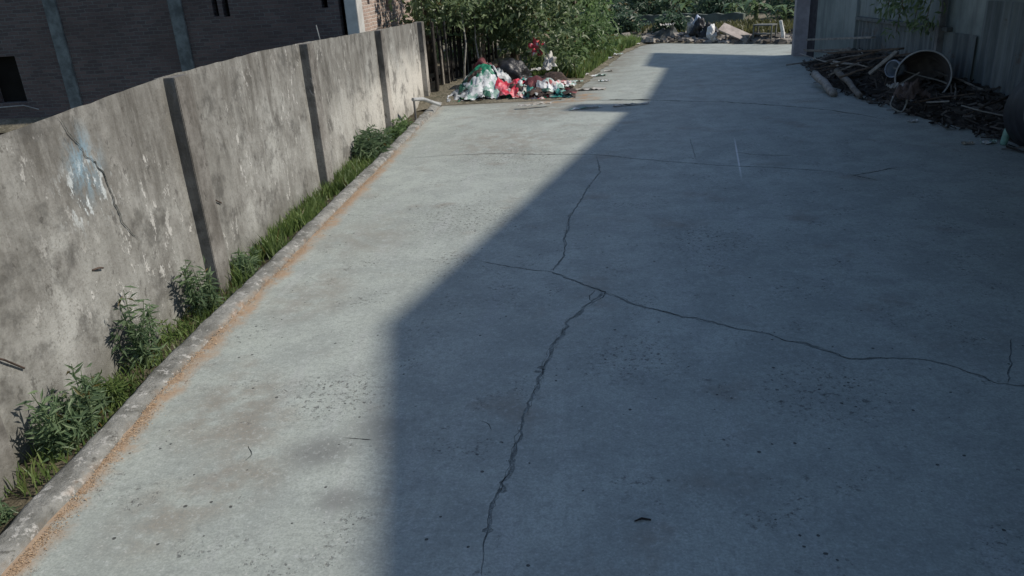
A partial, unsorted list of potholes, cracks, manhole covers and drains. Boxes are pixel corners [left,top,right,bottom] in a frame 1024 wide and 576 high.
crack [418,139,1024,575]
